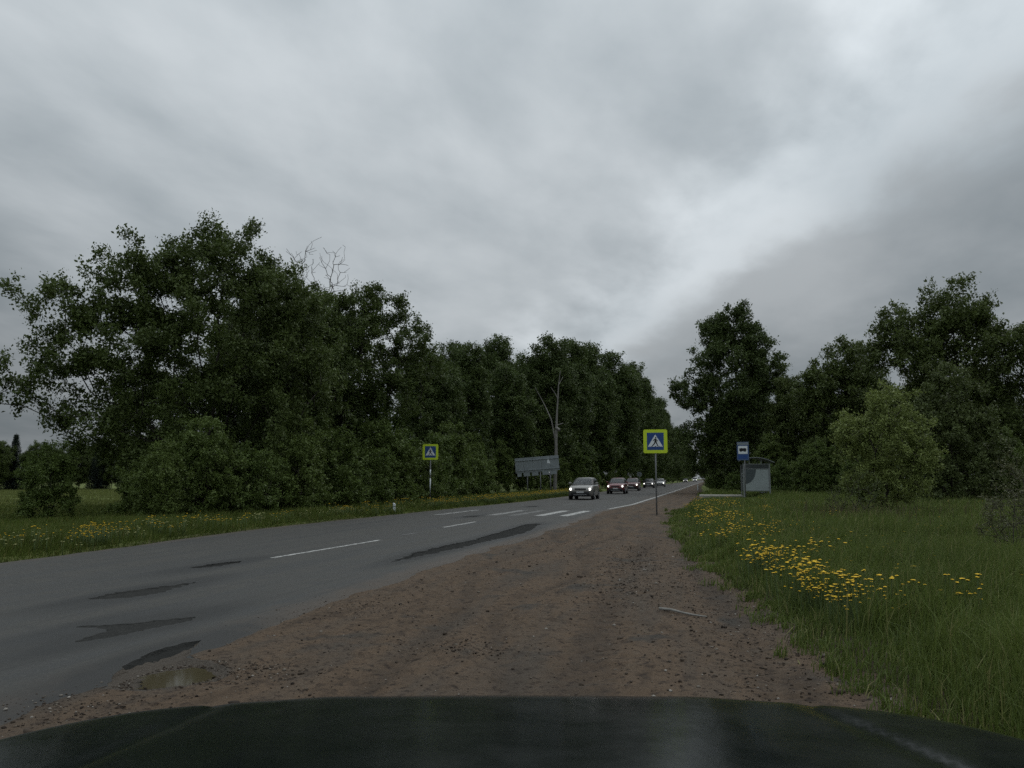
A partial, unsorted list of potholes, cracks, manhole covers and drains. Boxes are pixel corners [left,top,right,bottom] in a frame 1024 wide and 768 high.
pothole [103,640,232,692]
